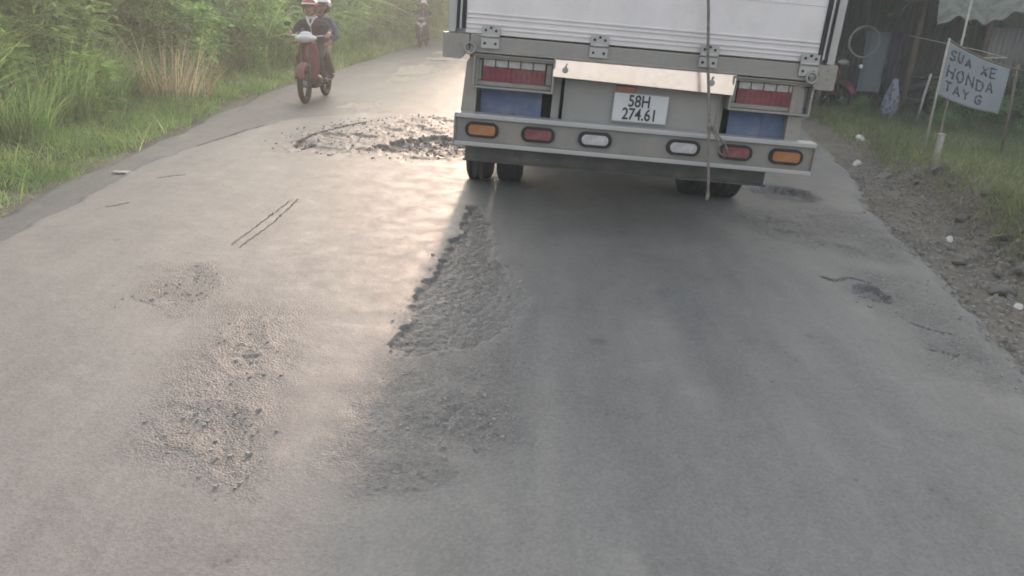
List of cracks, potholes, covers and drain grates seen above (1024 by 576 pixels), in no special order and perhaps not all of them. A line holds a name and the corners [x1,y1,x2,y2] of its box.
crack [910,323,961,357]
pothole [850,284,895,305]
pothole [150,397,257,487]
pothole [133,262,227,318]
pothole [199,316,279,381]
crack [232,199,298,248]
pothole [365,135,465,159]
pothole [388,206,535,360]
